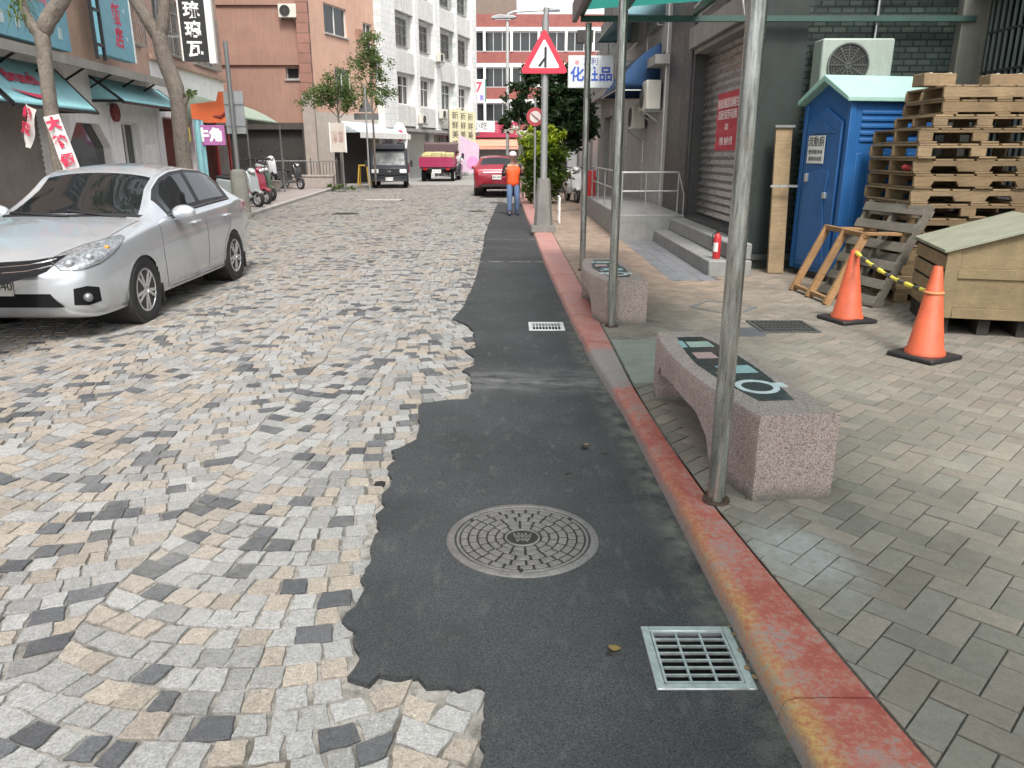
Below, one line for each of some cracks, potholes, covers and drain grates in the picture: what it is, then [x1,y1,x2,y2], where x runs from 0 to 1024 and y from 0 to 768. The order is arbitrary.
utility cover [690,300,757,313]
drain grate [528,322,565,331]
drain grate [746,320,821,333]
manhole cover [447,504,599,578]
drain grate [640,626,758,690]
